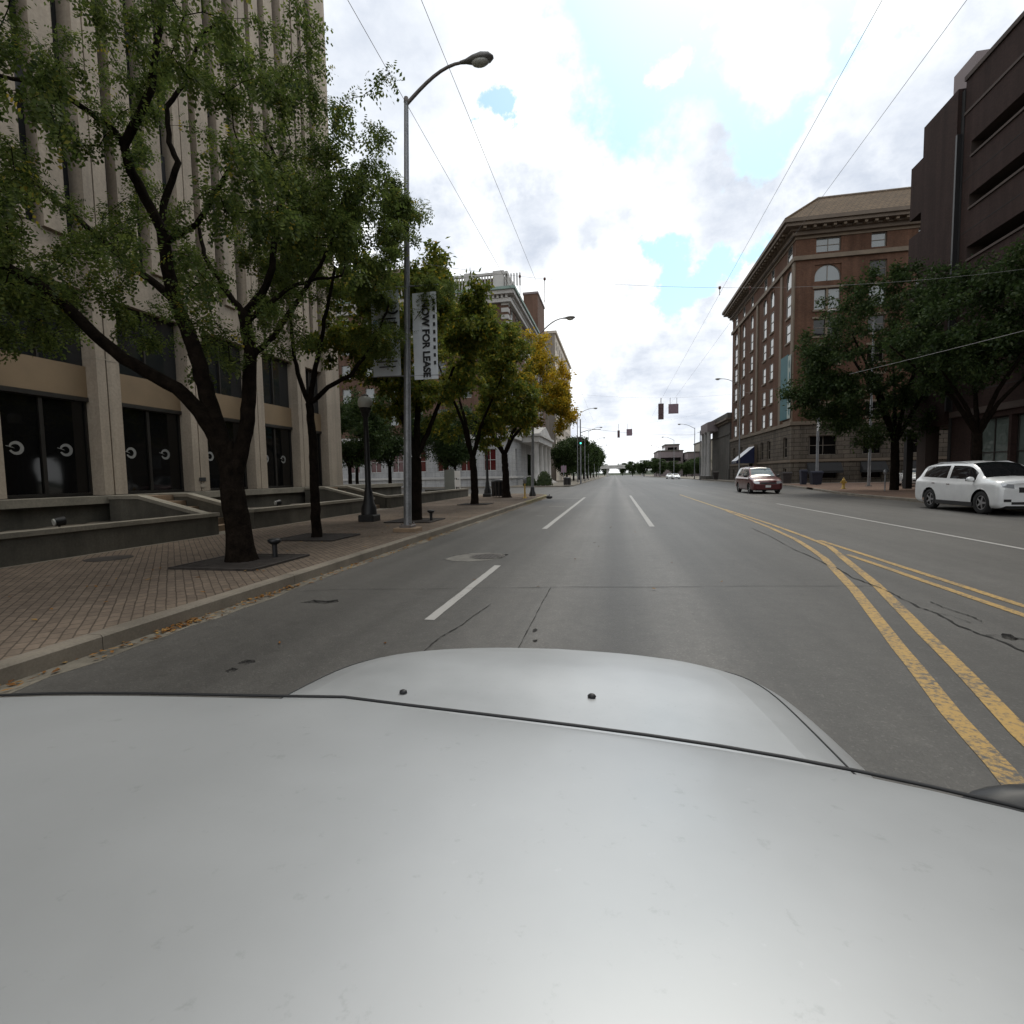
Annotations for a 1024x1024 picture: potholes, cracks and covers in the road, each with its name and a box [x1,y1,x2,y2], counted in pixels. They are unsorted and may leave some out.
crack [752,528,1024,651]
manhole cover [444,552,506,562]
